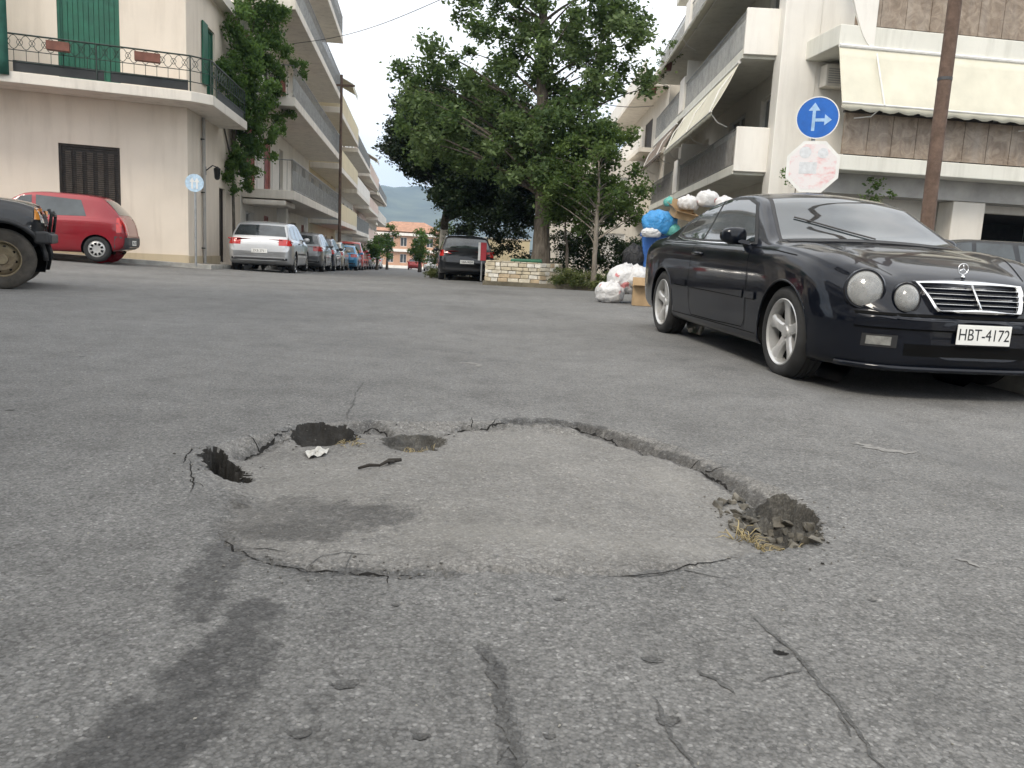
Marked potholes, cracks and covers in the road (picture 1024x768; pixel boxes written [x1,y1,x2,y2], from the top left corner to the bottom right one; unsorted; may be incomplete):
pothole [290,422,359,447]
crack [218,532,447,583]
crack [346,382,388,437]
crack [571,427,757,508]
crack [753,617,886,768]
crack [482,653,528,768]
pothole [734,493,827,550]
crack [605,556,740,579]
pothole [379,434,446,453]
crack [448,418,505,435]
pothole [197,446,253,483]
